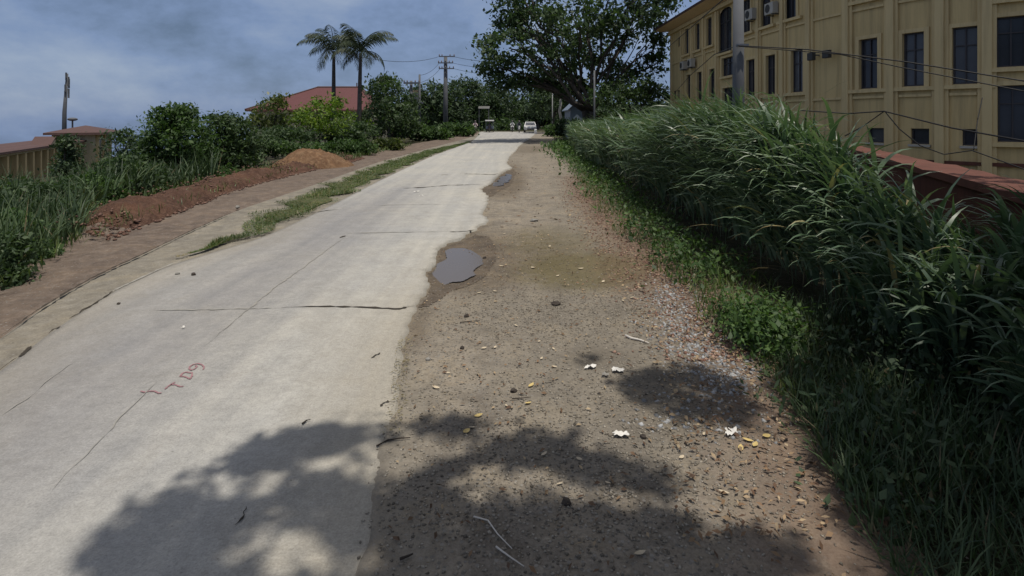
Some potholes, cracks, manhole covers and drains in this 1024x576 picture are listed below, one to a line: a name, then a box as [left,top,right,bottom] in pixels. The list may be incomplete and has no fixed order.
pothole [483,169,517,197]
crack [51,376,164,491]
pothole [419,235,497,307]
